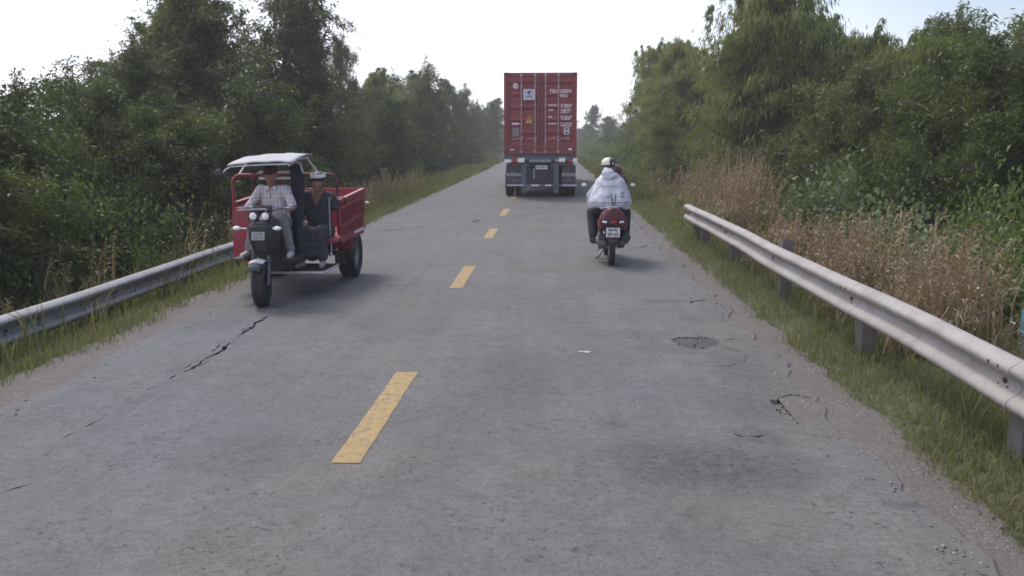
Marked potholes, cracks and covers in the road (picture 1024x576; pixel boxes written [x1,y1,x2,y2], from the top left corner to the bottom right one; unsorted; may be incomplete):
pothole [671,337,719,350]
pothole [770,394,821,424]
crack [44,305,287,457]
